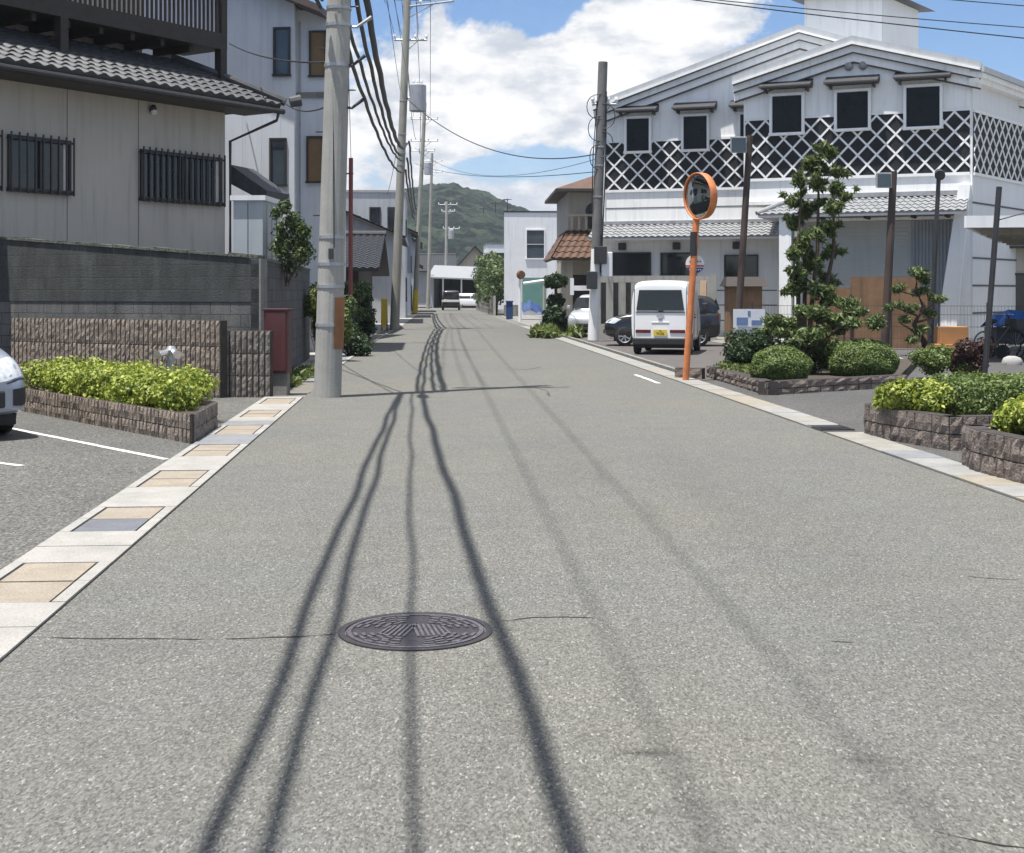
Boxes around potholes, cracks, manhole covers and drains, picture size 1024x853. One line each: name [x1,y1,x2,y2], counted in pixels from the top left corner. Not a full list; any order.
crack [933,830,1019,847]
manhole cover [338,612,492,652]
